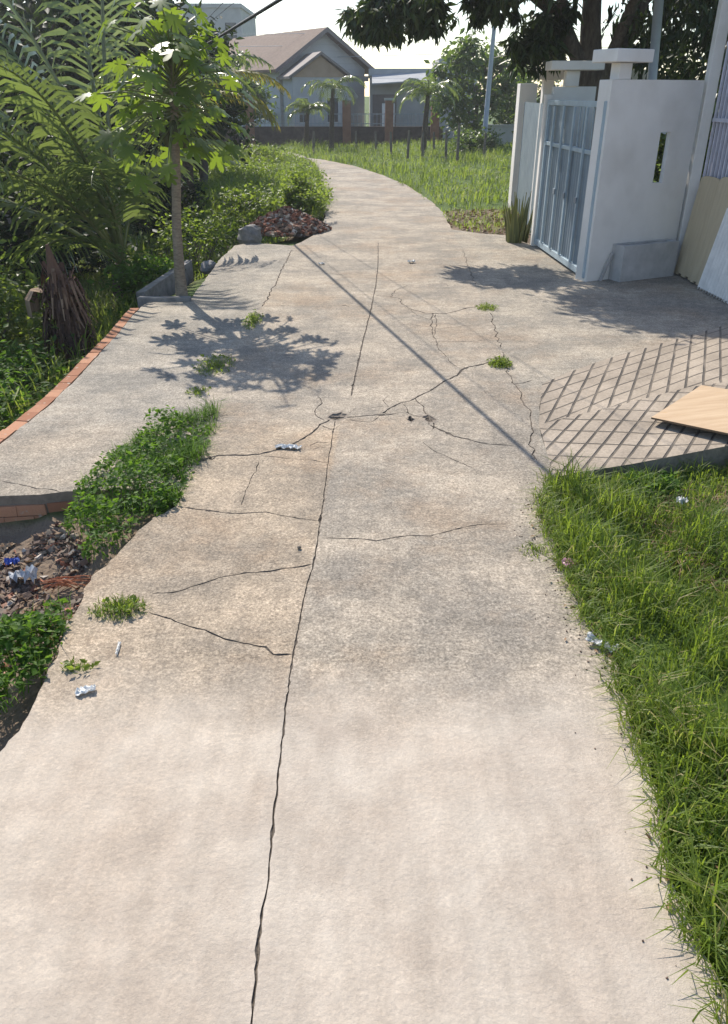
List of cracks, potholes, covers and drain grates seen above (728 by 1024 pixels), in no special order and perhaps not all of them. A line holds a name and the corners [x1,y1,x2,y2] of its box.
pothole [325,410,351,421]
crack [151,243,511,1024]
